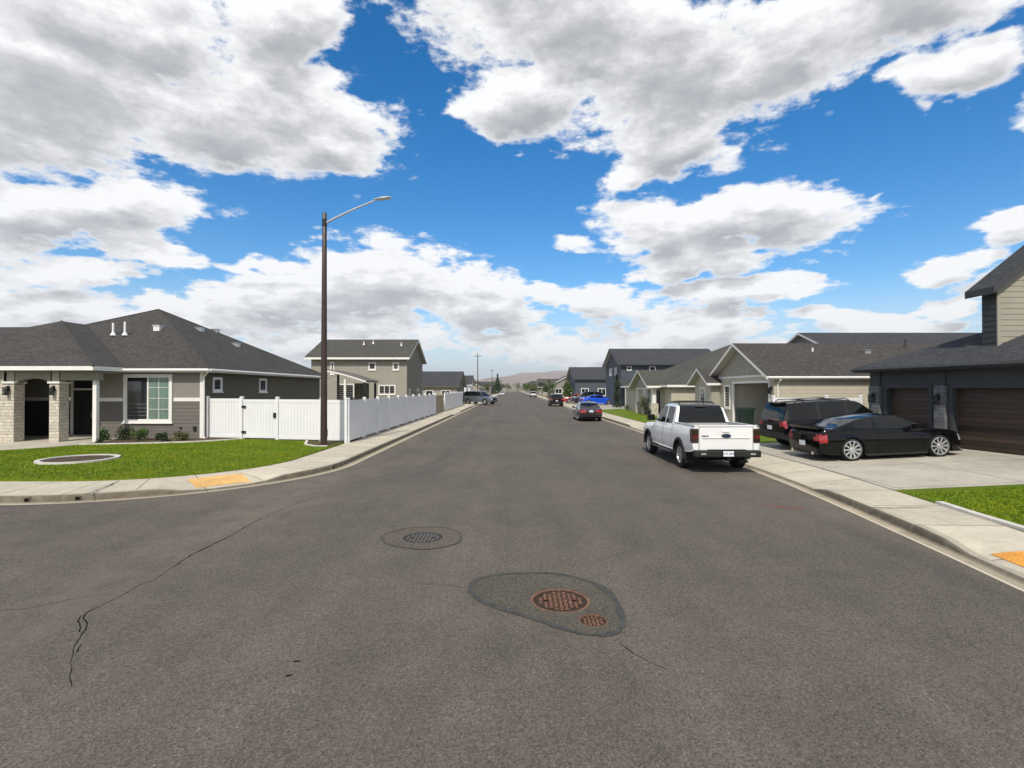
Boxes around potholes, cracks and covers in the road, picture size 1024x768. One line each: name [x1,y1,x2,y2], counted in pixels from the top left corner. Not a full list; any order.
manhole cover [531,589,590,613]
manhole cover [579,614,608,627]
manhole cover [401,531,445,544]
crack [8,497,313,686]
